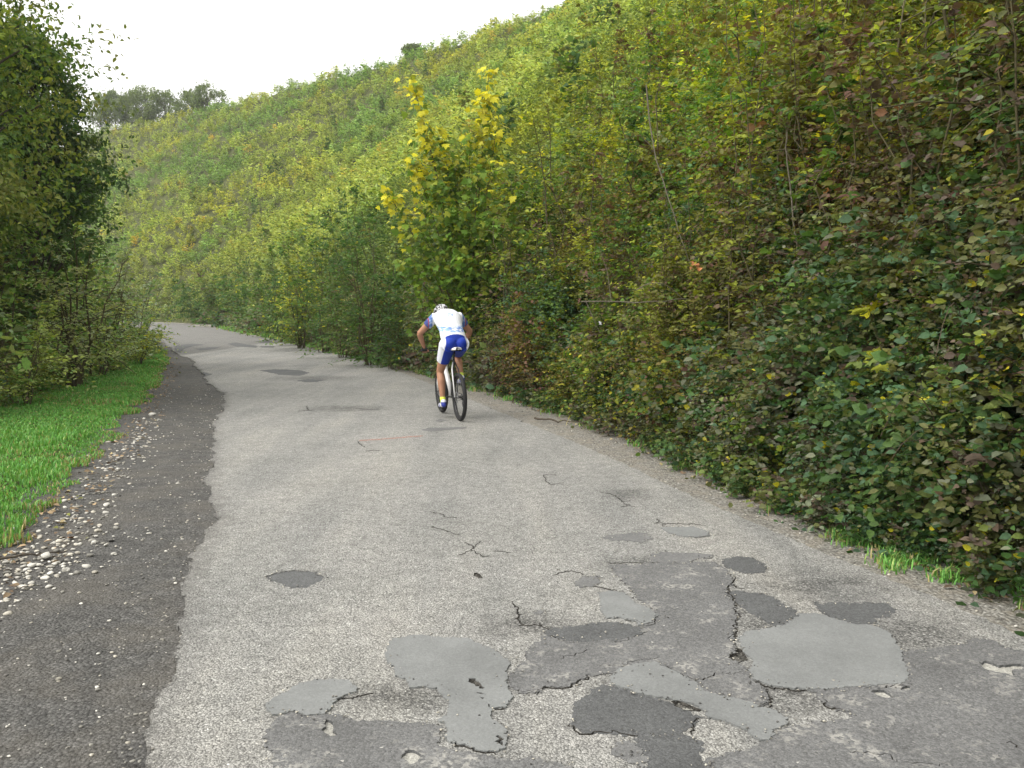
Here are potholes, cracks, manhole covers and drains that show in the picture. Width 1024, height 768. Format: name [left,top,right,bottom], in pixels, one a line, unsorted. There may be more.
crack [431,512,511,557]
crack [512,601,656,660]
crack [727,577,744,647]
